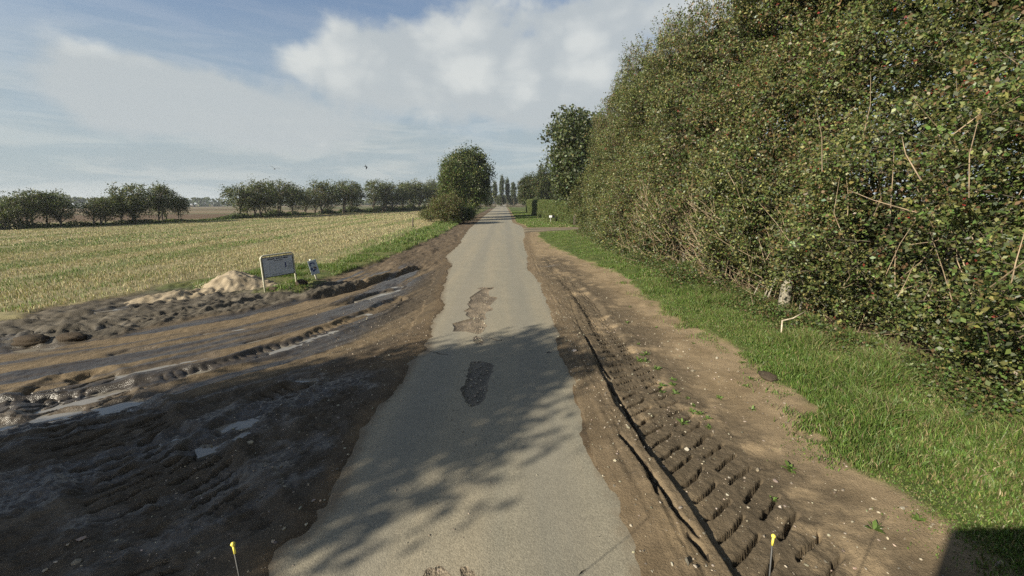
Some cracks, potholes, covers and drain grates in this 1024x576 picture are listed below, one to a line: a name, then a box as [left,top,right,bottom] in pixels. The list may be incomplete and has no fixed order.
pothole [453,287,497,334]
